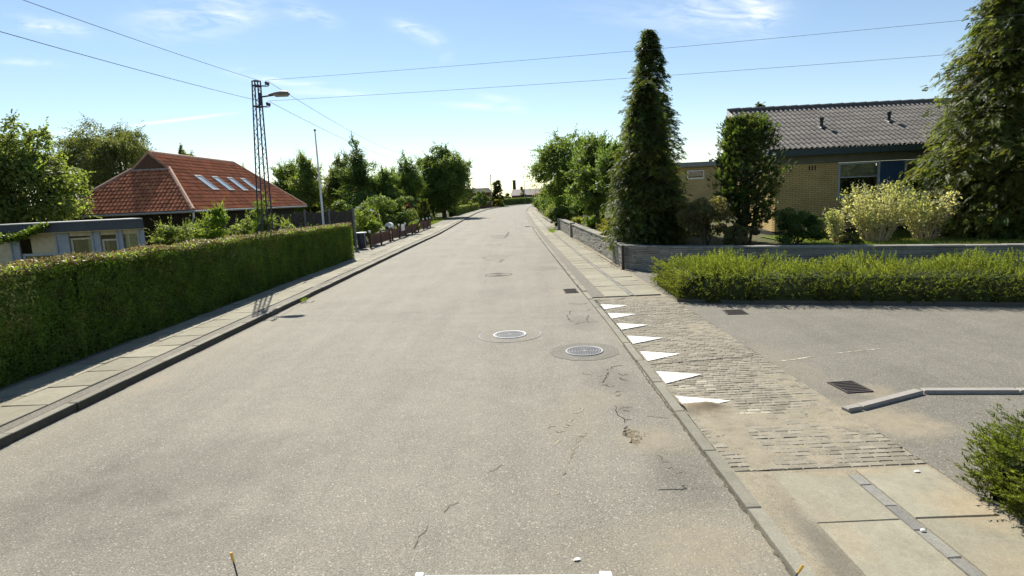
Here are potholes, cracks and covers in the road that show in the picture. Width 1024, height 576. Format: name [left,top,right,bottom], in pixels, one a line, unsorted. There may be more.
manhole cover [479,328,541,342]
crack [582,345,793,576]
pothole [612,424,656,448]
crack [413,464,502,549]
manhole cover [550,343,619,361]
drain grate [827,380,874,394]
